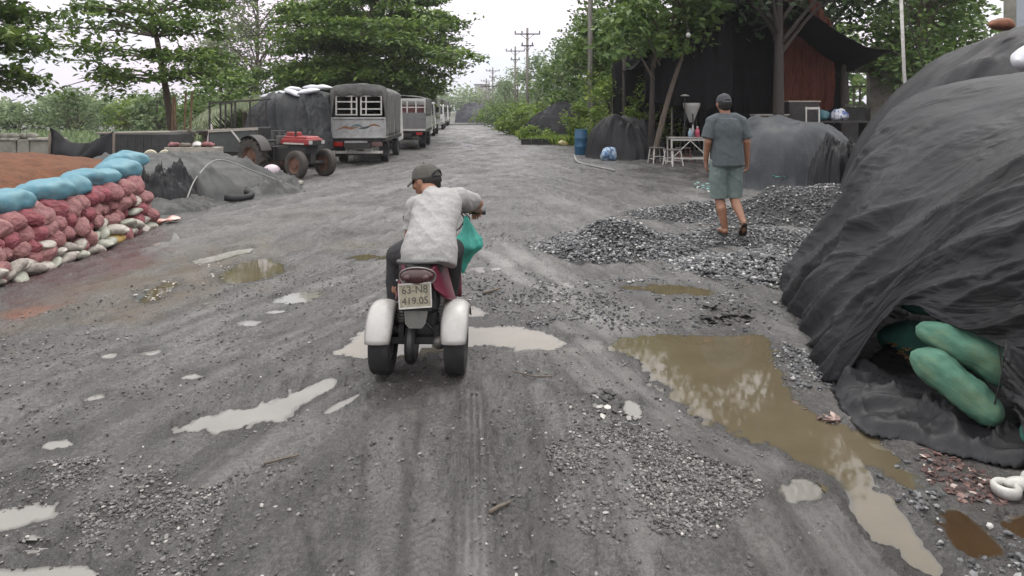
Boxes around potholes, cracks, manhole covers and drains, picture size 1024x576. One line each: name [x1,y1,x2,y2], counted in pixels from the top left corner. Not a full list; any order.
pothole [206,256,294,286]
pothole [124,276,191,306]
pothole [159,373,346,438]
pothole [923,495,1024,567]
pothole [600,327,970,576]
pothole [326,316,576,361]
pothole [618,279,731,299]
